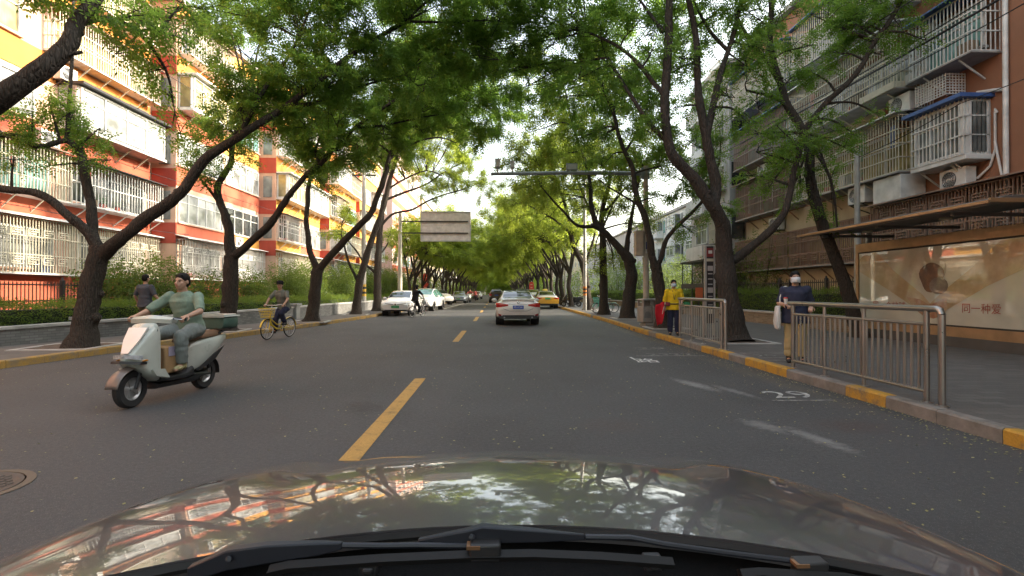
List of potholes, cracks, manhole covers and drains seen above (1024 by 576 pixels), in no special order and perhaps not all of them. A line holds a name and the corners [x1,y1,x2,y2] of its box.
manhole cover [0,469,37,495]
